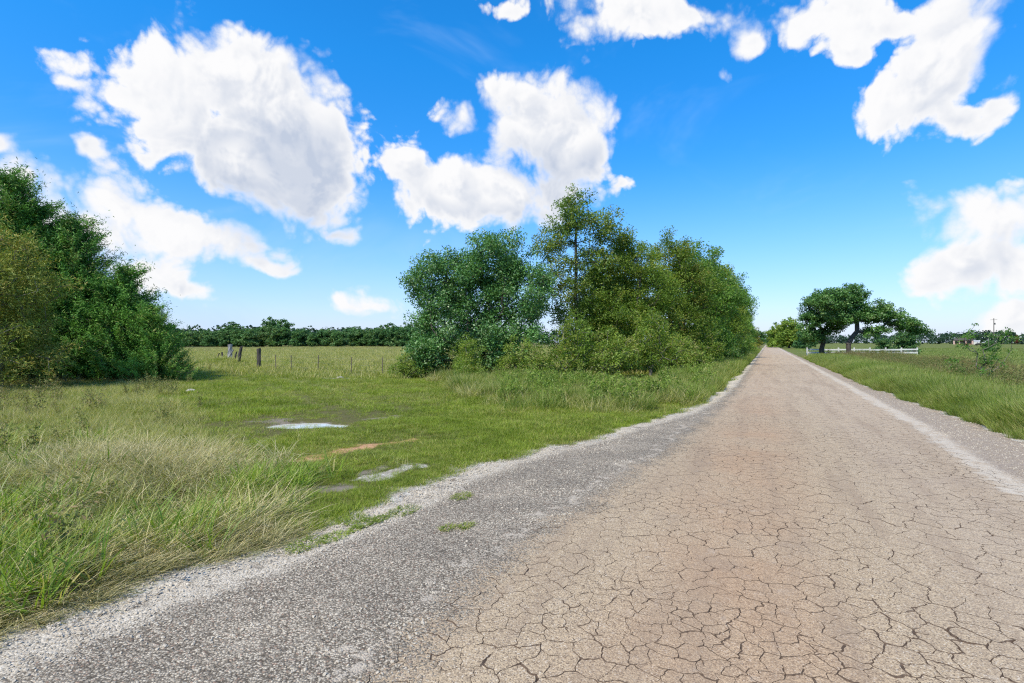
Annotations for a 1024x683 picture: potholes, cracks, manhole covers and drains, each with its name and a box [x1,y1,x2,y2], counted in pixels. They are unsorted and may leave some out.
crack [351,363,1024,683]
